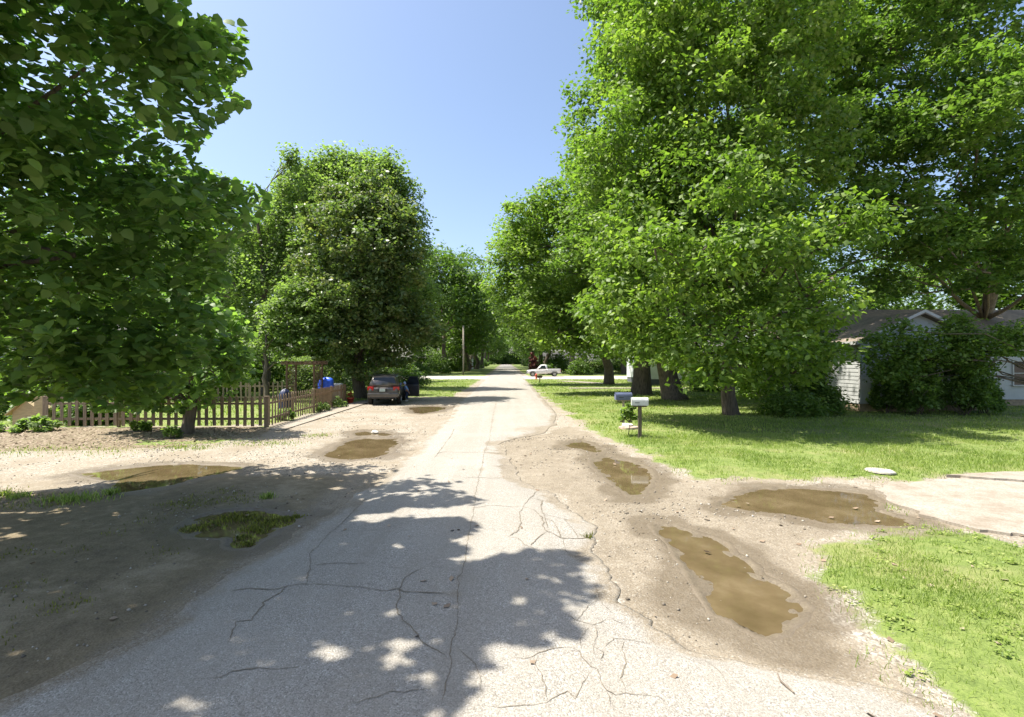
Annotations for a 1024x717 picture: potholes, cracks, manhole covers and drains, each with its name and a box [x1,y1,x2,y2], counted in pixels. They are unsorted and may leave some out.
pothole [587,454,659,497]
crack [227,499,666,707]
pothole [403,405,452,414]
pothole [169,506,308,551]
crack [198,663,308,679]
pothole [67,462,255,495]
pothole [317,436,406,460]
pothole [709,486,932,528]
pothole [559,440,609,453]
pothole [647,523,816,642]
